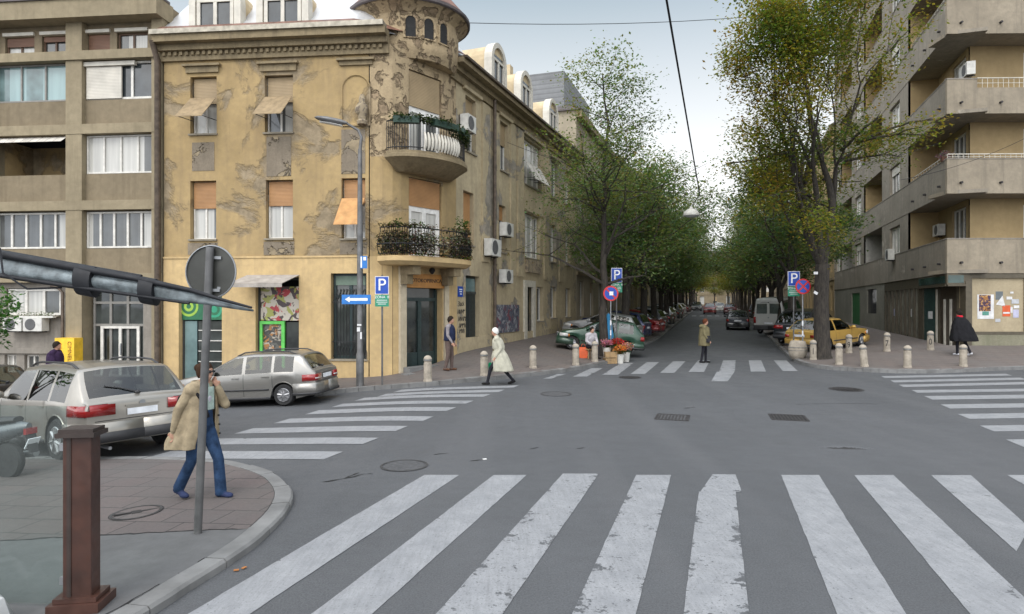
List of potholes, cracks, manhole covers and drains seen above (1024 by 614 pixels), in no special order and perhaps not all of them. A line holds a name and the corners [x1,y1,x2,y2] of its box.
manhole cover [380,459,428,471]
manhole cover [108,505,164,521]
drain grate [768,414,810,422]
drain grate [654,413,690,421]
